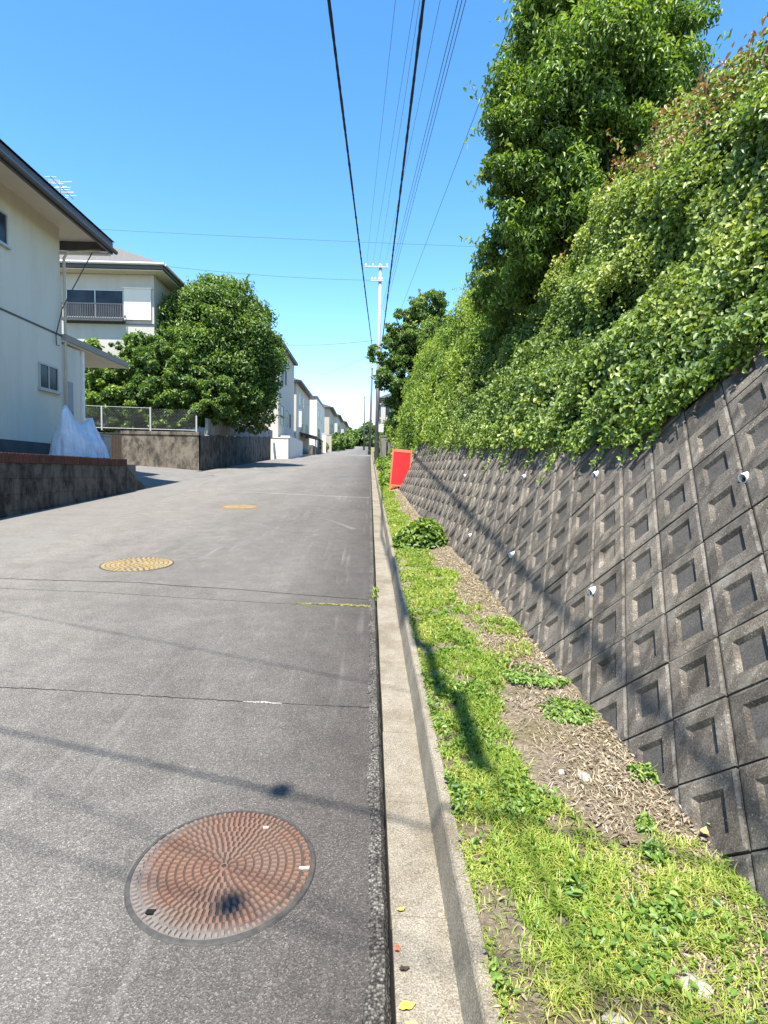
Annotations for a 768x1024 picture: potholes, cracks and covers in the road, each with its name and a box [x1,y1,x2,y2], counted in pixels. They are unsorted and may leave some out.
manhole cover [124,810,316,947]
manhole cover [99,557,174,572]
